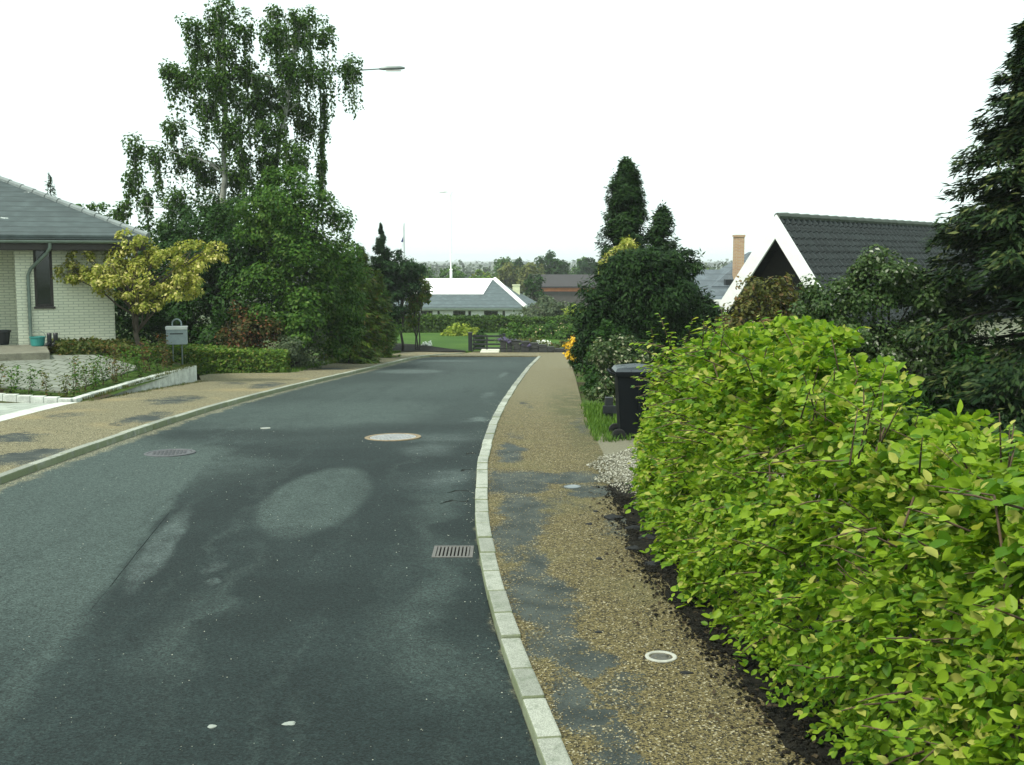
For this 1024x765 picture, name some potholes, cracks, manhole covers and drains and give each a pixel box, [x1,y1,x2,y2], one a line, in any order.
manhole cover [144,449,196,457]
utility cover [645,651,677,663]
manhole cover [365,433,421,441]
crack [442,453,476,504]
drain grate [431,546,474,558]
